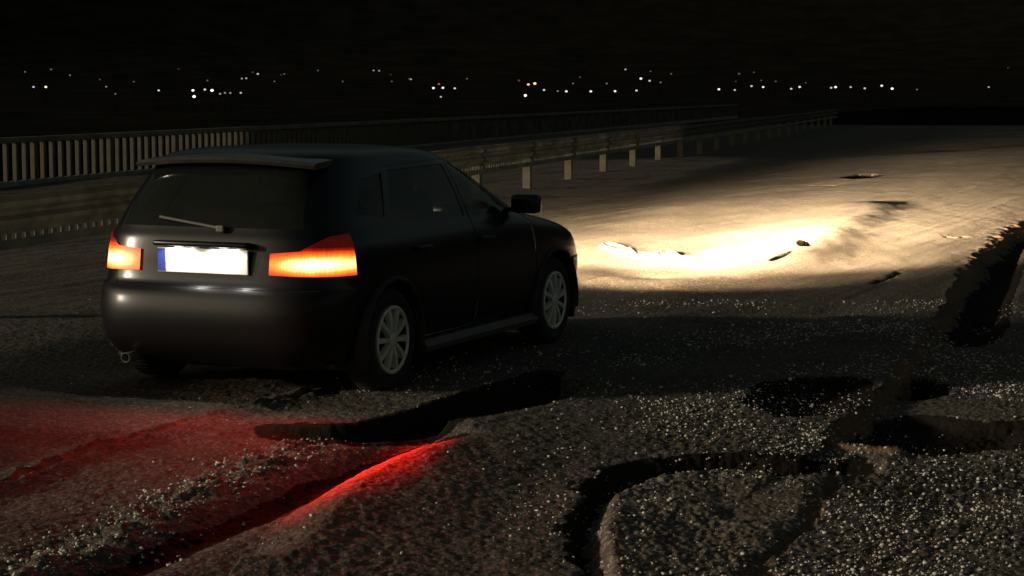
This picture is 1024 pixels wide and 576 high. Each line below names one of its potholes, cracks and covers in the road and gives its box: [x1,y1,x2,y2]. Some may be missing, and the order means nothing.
crack [738,221,1024,576]
pothole [737,376,876,418]
